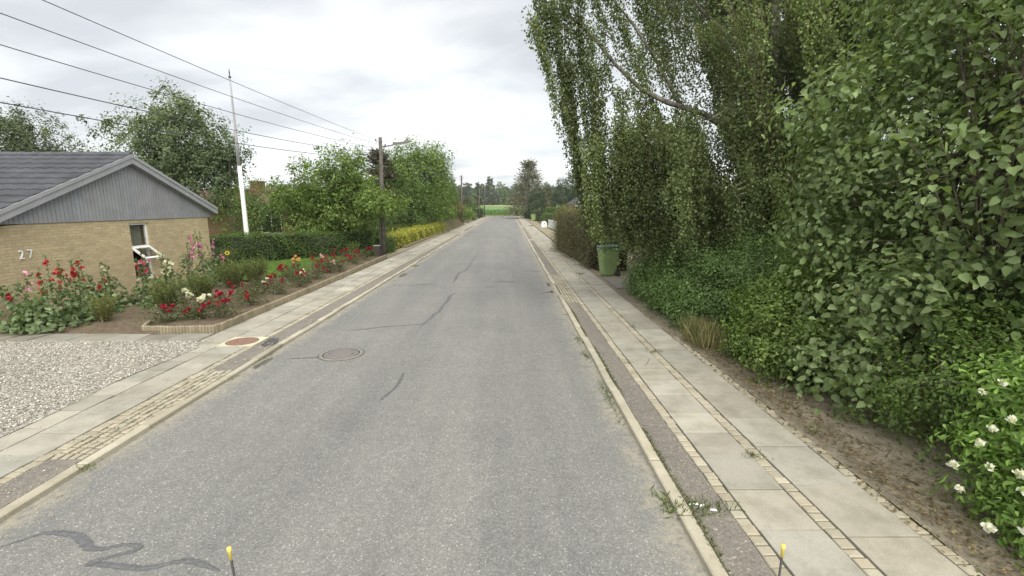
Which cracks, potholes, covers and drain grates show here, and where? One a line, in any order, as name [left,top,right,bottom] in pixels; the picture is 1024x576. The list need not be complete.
manhole cover [318,347,364,361]
manhole cover [216,337,269,348]
